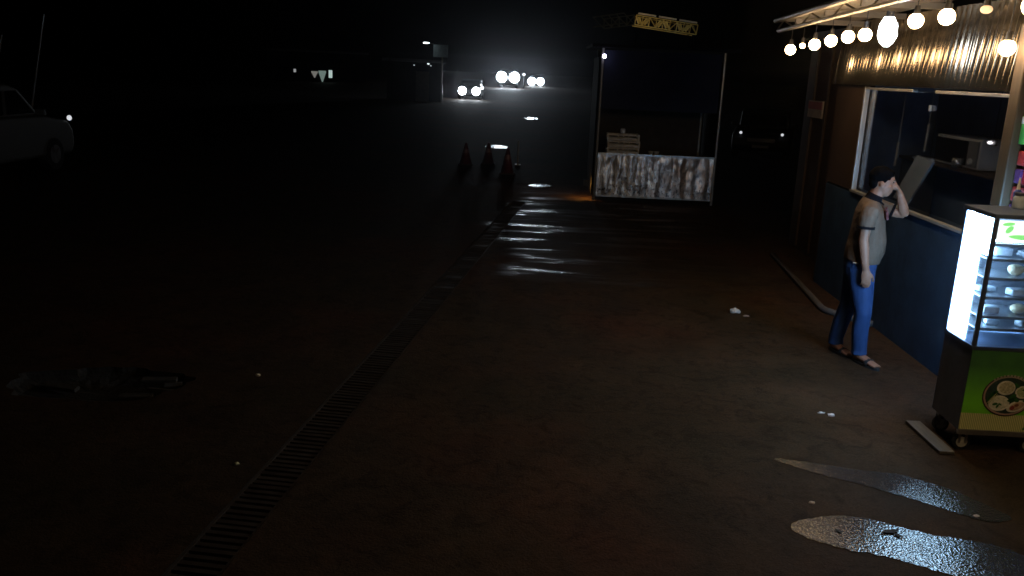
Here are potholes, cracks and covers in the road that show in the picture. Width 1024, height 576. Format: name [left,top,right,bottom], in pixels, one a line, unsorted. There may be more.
drain grate [161,201,526,576]
